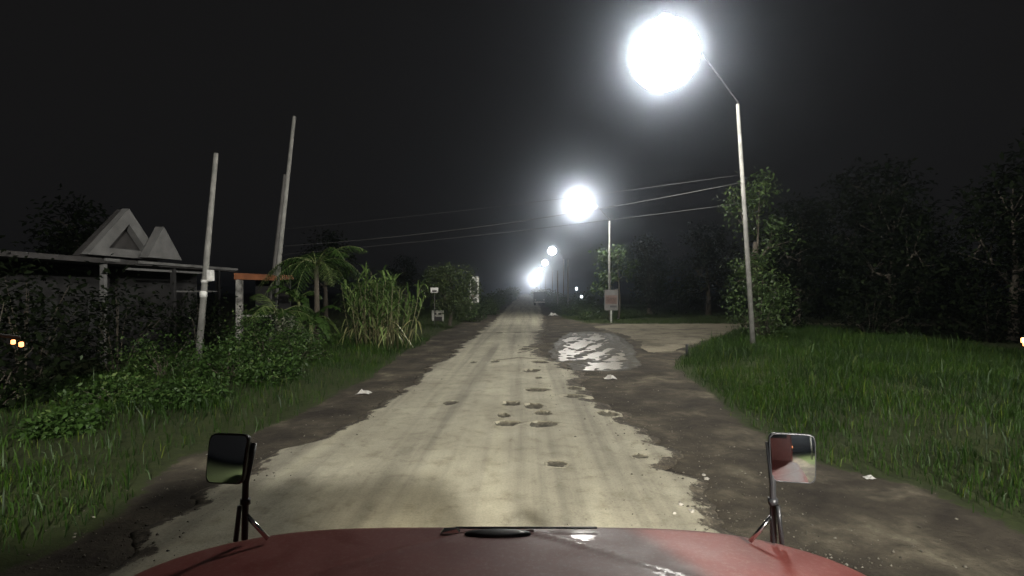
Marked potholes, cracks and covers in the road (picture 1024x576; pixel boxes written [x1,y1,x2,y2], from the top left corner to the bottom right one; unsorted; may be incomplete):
pothole [544,459,570,468]
pothole [522,402,546,410]
pothole [519,420,569,428]
pothole [548,331,642,372]
pothole [592,410,623,418]
